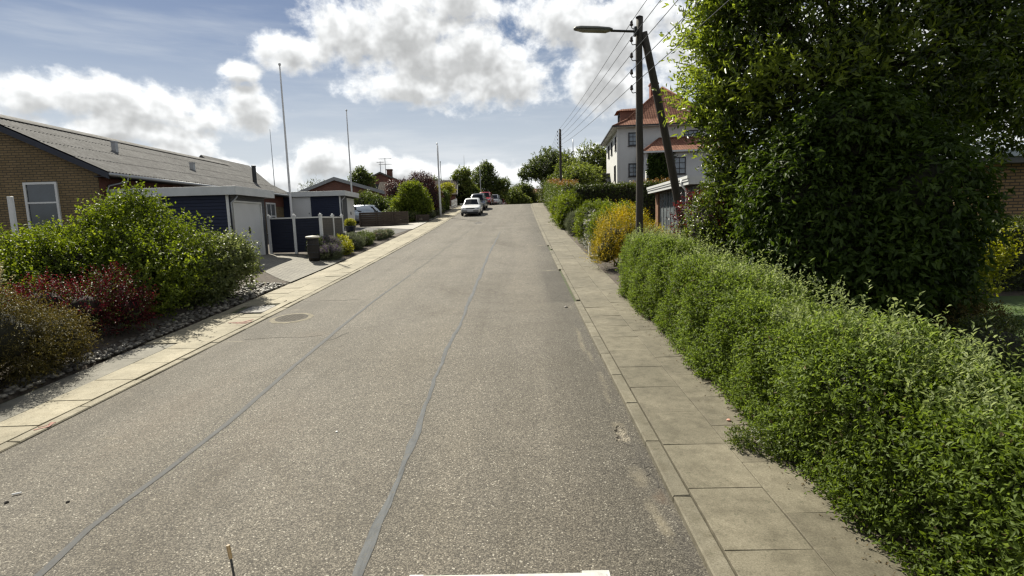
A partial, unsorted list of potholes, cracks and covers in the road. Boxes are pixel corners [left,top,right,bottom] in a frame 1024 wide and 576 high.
pothole [613,425,631,443]
manhole cover [269,313,314,324]
